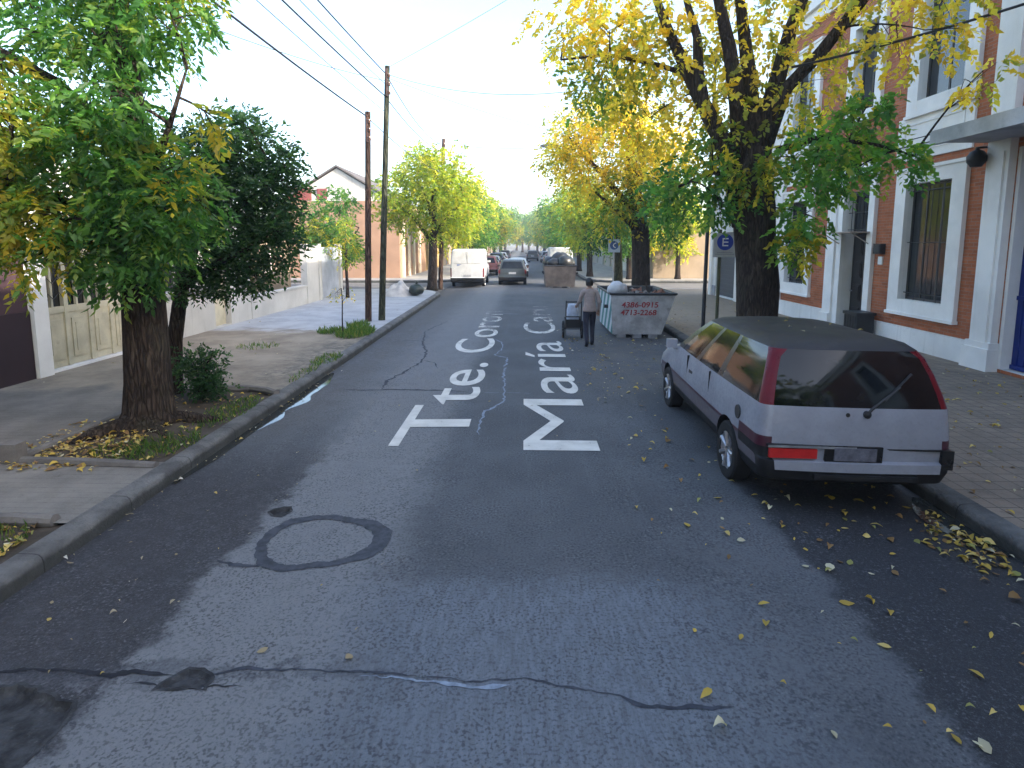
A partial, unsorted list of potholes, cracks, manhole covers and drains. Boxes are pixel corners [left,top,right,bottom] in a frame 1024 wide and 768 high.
crack [0,666,734,710]
crack [477,340,509,434]
crack [348,322,466,392]
pothole [152,667,215,691]
pothole [268,506,293,517]
